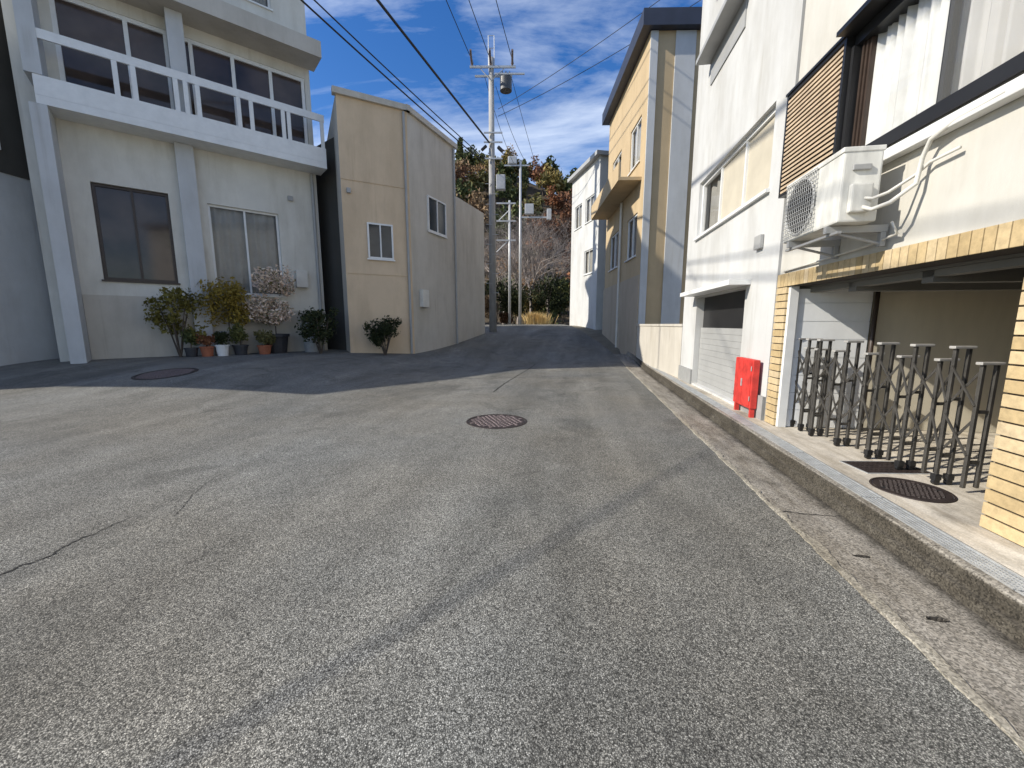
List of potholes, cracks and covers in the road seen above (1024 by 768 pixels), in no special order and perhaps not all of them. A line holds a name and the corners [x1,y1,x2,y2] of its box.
drain grate [790,452,883,499]
manhole cover [466,414,527,429]
manhole cover [131,368,199,380]
manhole cover [869,477,958,503]
crack [0,520,124,575]
